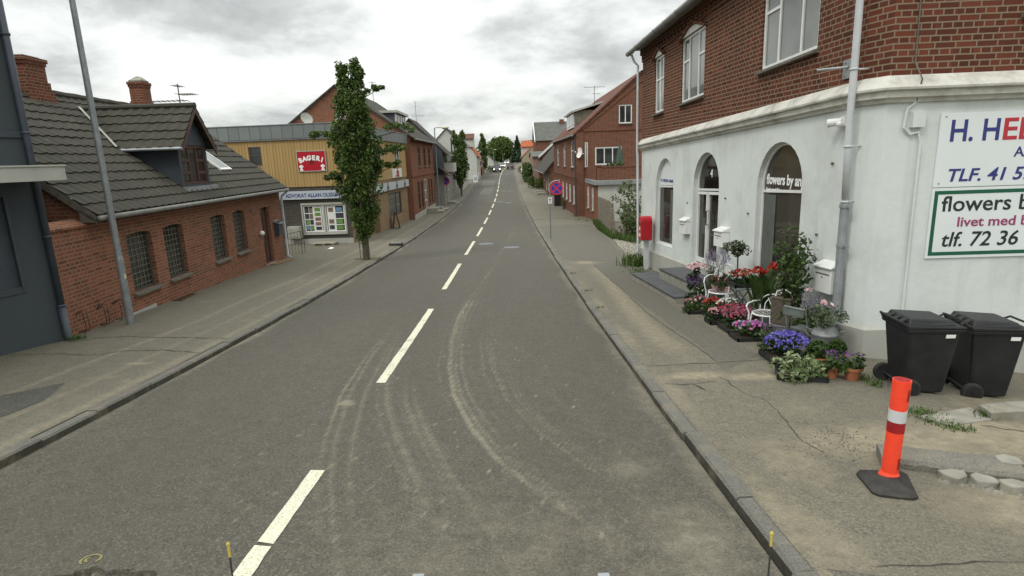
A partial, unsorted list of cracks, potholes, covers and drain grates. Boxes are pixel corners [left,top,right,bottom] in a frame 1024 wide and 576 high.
crack [647,359,827,455]
